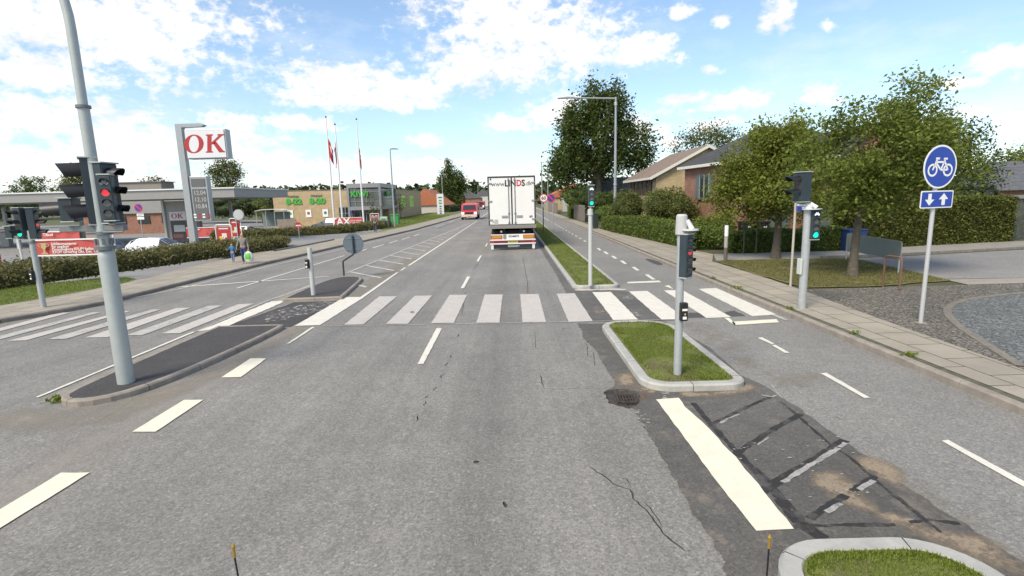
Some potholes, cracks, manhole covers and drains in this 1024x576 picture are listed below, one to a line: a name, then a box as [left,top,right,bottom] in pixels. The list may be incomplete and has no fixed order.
crack [588,465,692,551]
drain grate [615,394,638,404]
